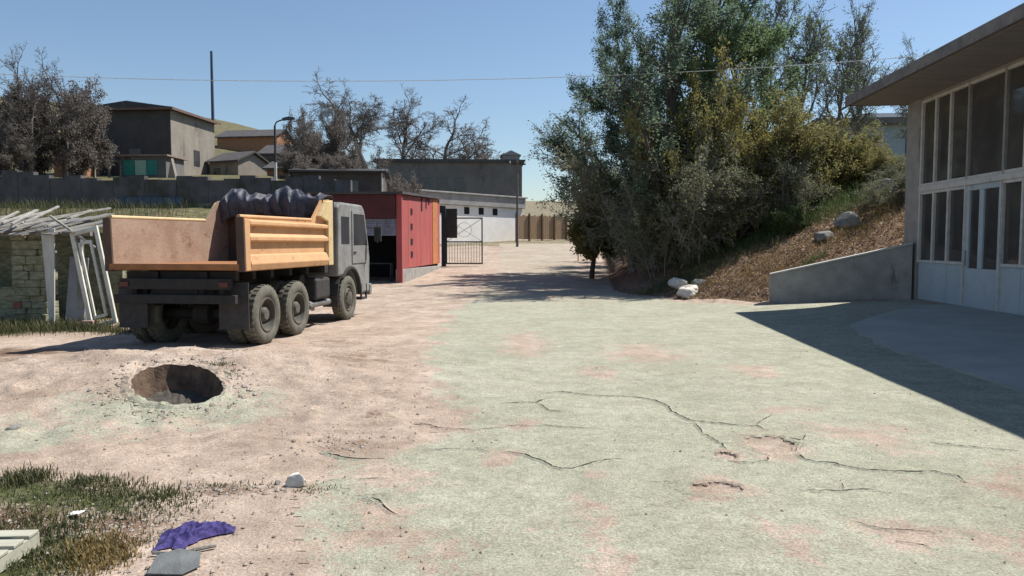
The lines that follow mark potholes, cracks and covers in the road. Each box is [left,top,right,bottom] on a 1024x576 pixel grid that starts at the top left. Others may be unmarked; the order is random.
crack [314,451,408,517]
pothole [699,448,752,463]
pothole [119,362,235,410]
crack [850,520,941,551]
crack [414,391,1023,494]
pothole [672,477,760,500]
